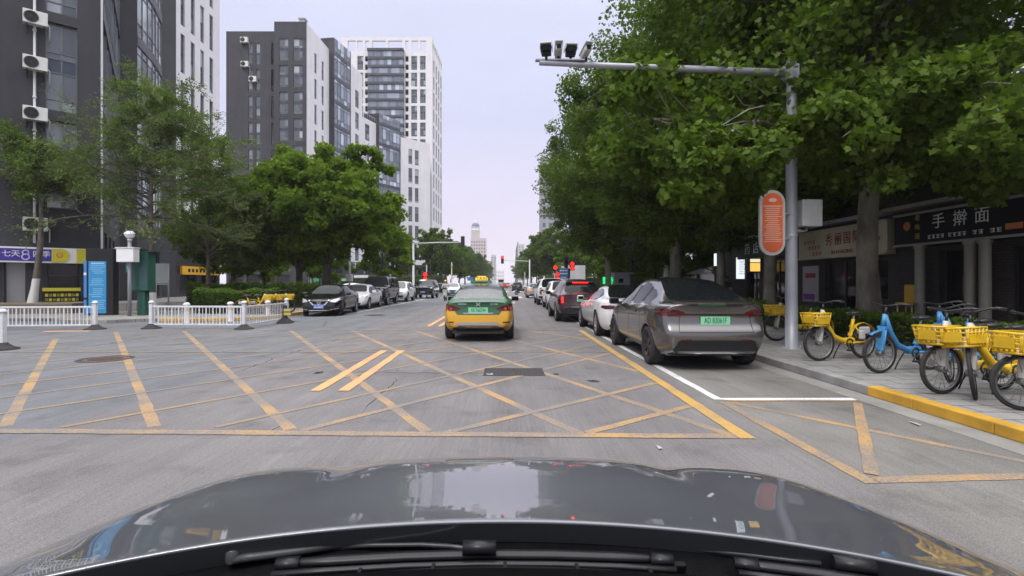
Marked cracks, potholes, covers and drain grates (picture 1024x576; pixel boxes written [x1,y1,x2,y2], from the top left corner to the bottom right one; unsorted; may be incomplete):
manhole cover [483,368,546,376]
manhole cover [74,355,135,363]
